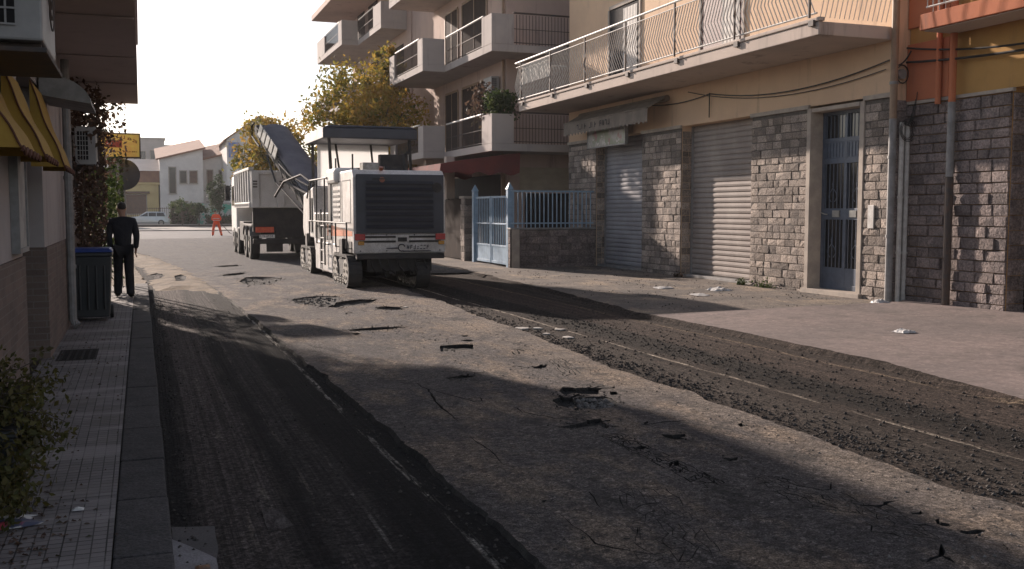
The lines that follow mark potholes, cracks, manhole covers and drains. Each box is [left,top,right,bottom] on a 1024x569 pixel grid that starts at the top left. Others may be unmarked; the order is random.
pothole [553,395,577,410]
pothole [559,385,615,395]
pothole [276,293,347,307]
crack [417,371,568,421]
pothole [223,276,282,287]
crack [559,420,725,563]
